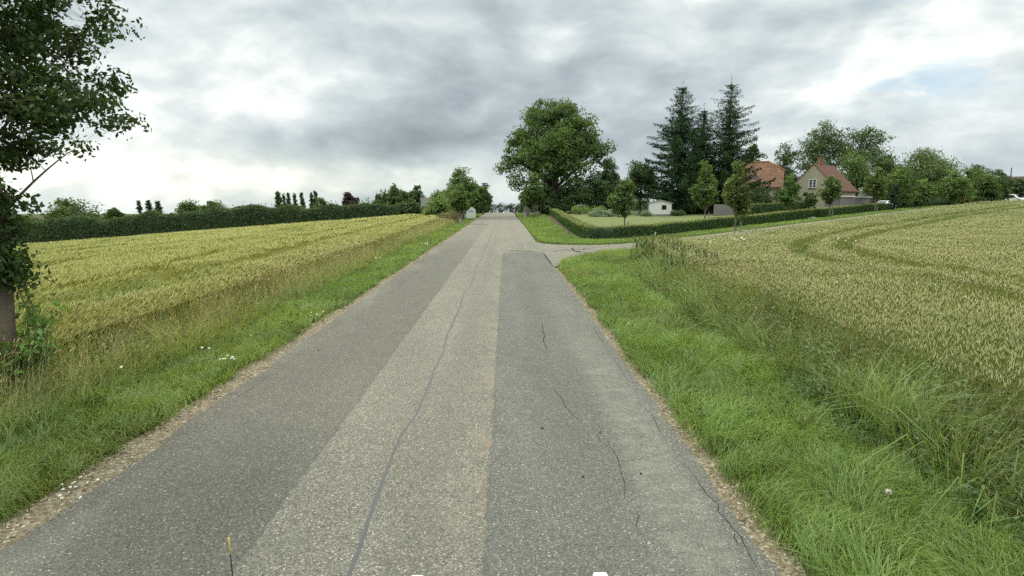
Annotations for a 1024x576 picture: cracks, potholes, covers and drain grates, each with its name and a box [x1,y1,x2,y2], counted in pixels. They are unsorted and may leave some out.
crack [596,424,640,523]
crack [693,474,762,576]
